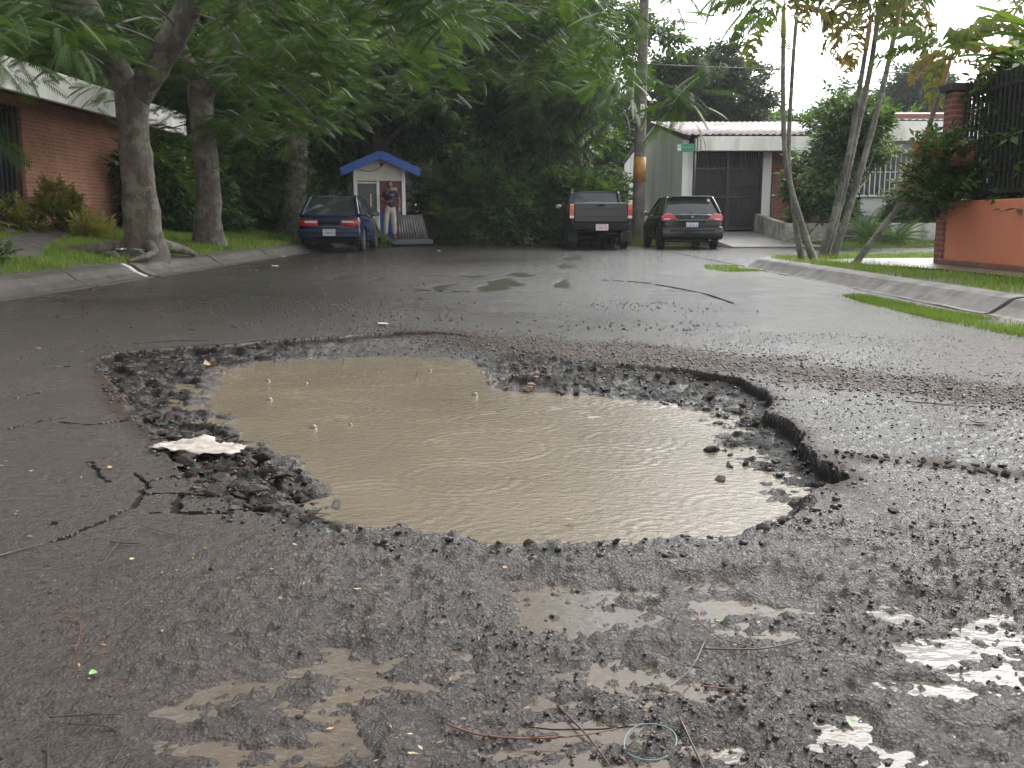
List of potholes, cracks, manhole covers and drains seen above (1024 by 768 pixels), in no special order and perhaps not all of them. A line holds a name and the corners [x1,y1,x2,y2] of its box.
crack [49,461,234,543]
pothole [95,331,852,558]
